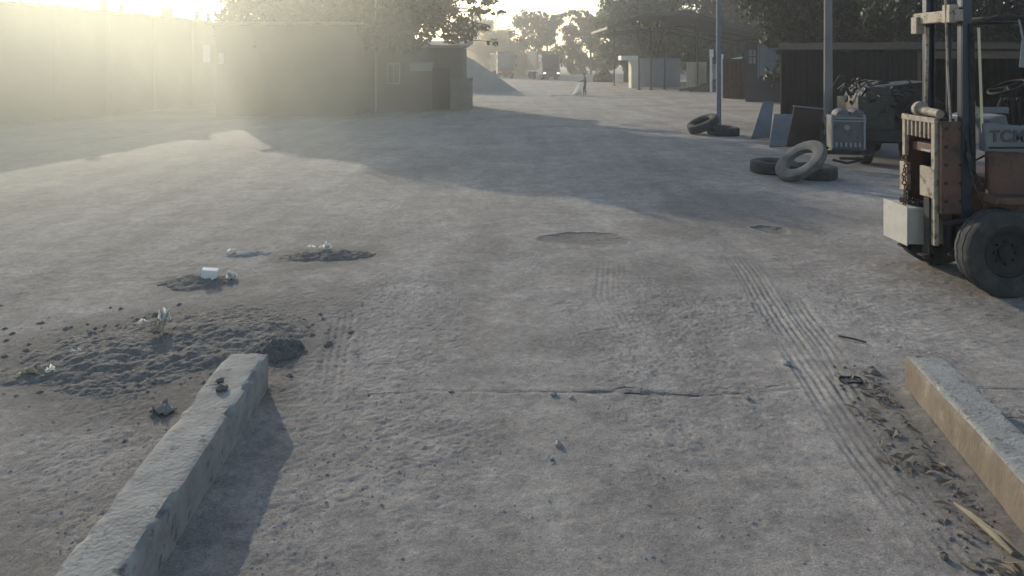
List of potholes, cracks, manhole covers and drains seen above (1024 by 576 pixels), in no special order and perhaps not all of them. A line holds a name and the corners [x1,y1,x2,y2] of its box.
crack [370,383,798,398]
